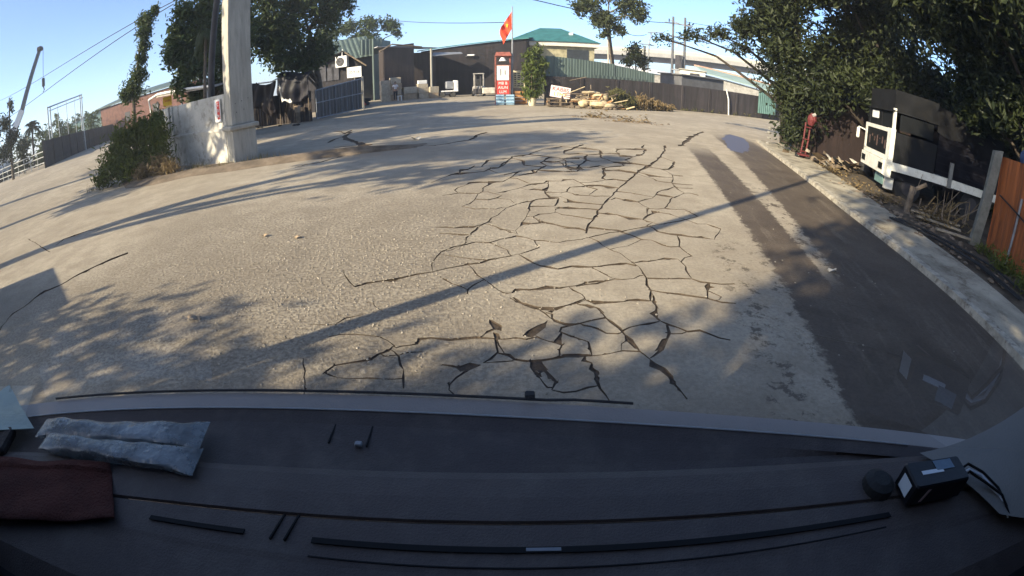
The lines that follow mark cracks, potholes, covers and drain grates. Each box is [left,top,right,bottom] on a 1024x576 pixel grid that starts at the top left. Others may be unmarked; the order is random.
crack [0,228,128,330]
crack [298,130,736,400]
